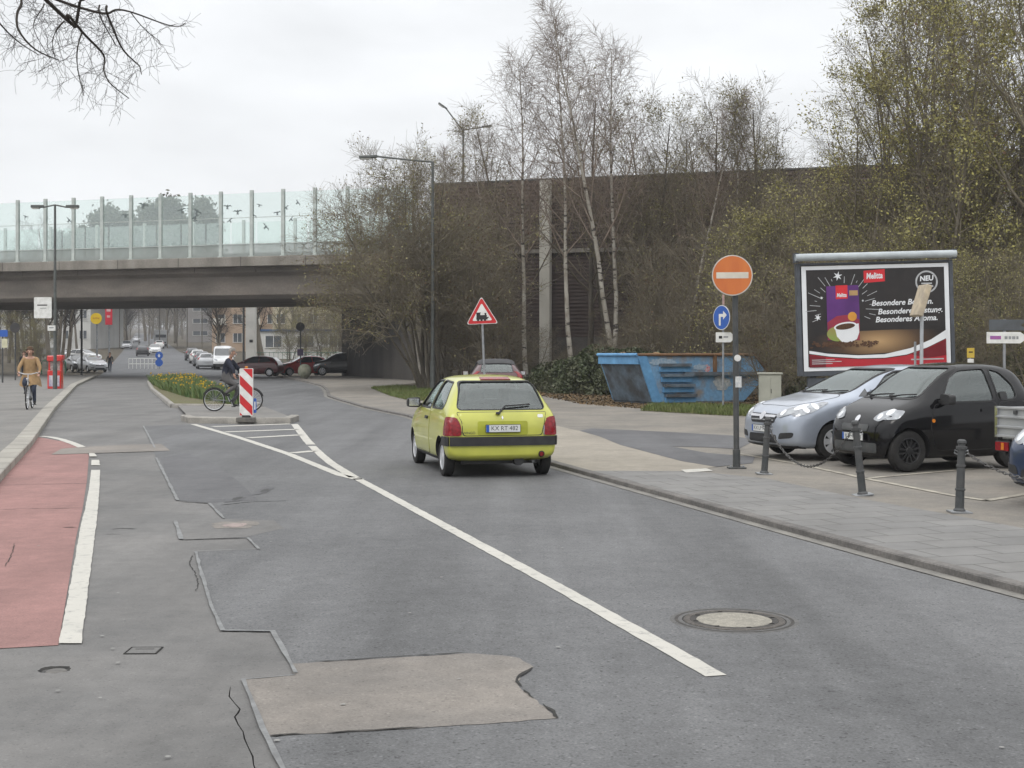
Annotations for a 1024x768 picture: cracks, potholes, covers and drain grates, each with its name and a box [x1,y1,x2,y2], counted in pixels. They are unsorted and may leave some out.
manhole cover [669,608,800,634]
crack [228,688,255,768]
crack [184,538,226,591]
